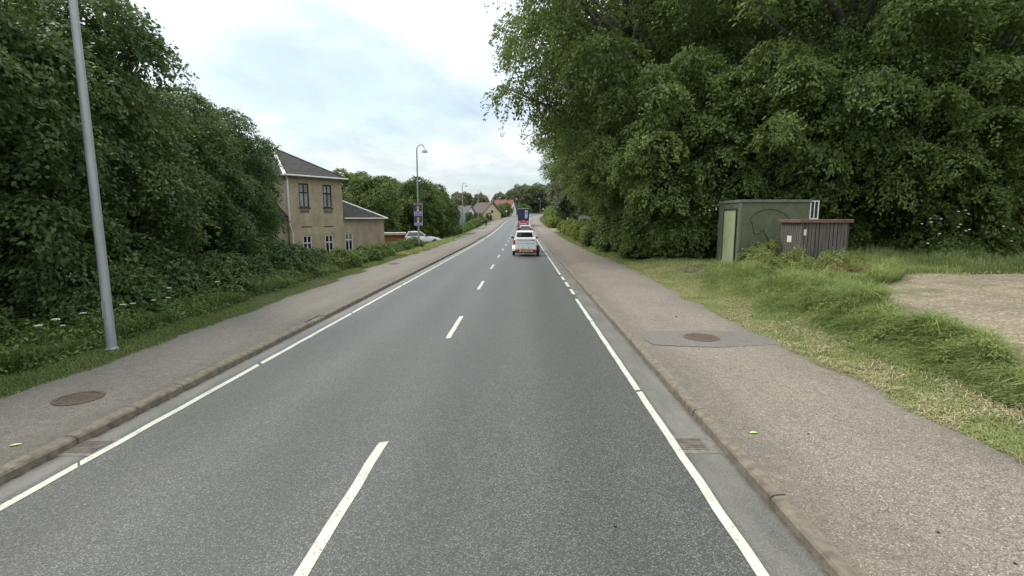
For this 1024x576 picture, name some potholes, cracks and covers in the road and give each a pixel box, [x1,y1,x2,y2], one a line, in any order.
drain grate [673,435,724,454]
manhole cover [683,333,720,342]
drain grate [56,438,122,456]
manhole cover [51,391,106,406]
